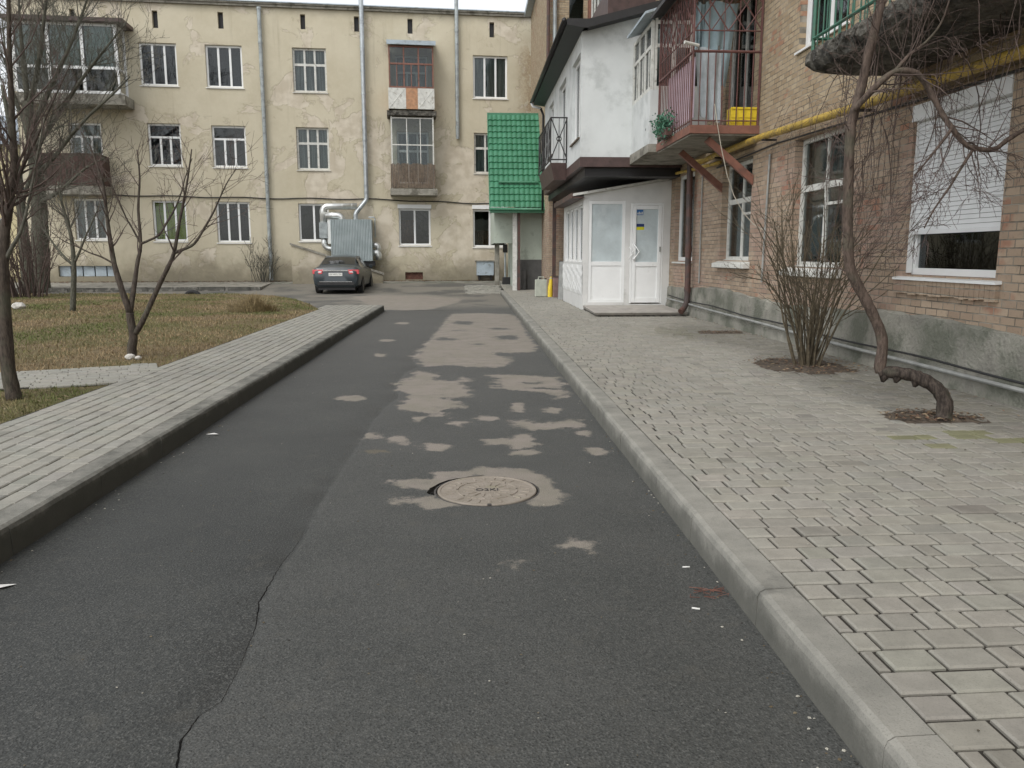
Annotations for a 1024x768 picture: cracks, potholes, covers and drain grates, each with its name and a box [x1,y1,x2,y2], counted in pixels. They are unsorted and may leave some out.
manhole cover [434,476,540,507]
crack [175,532,304,768]
